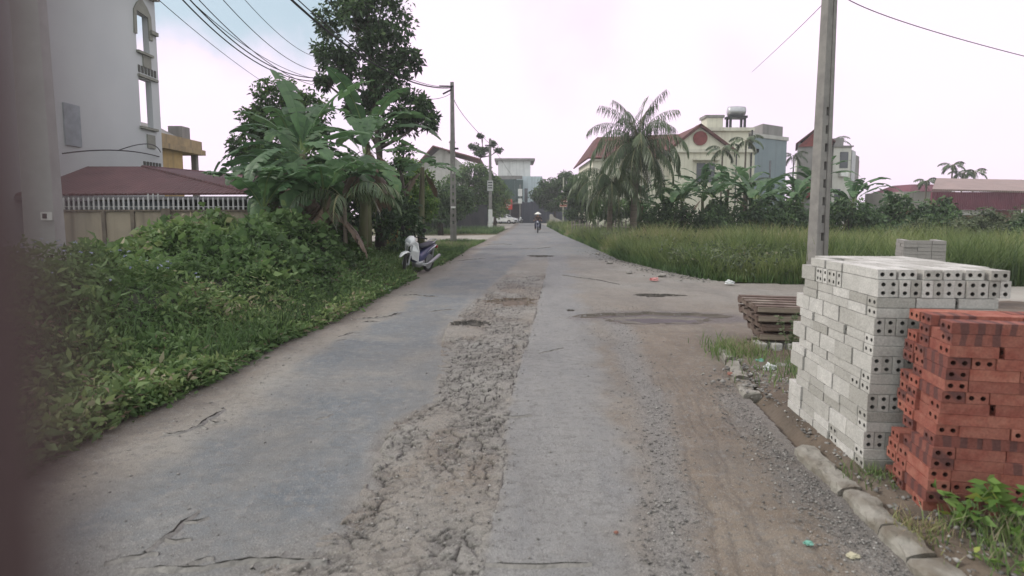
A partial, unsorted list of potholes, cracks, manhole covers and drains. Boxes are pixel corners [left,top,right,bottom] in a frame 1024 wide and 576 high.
crack [104,244,564,576]
pothole [572,311,734,324]
